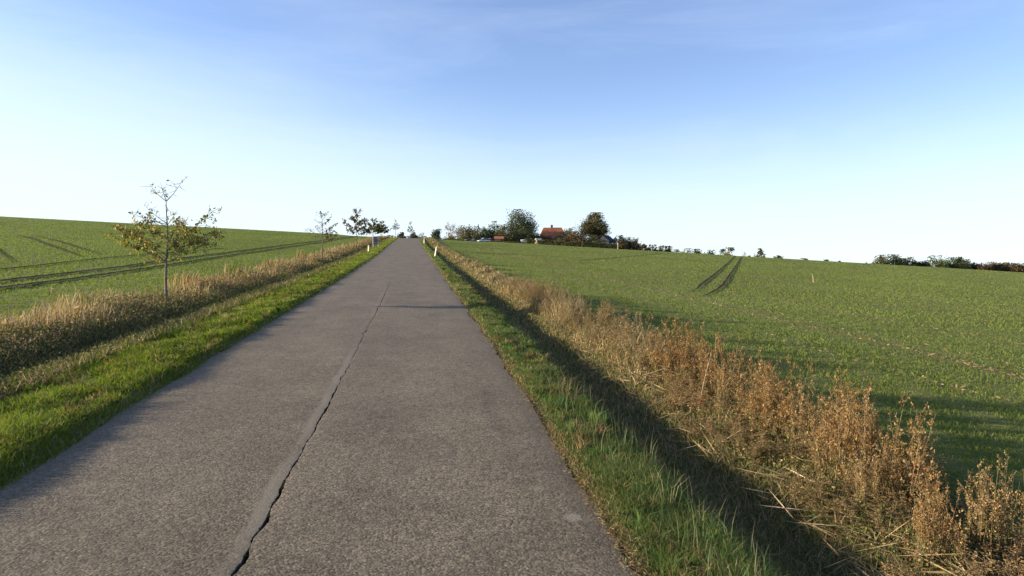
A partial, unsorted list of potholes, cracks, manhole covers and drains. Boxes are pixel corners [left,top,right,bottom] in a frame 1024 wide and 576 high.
crack [231,283,391,576]
